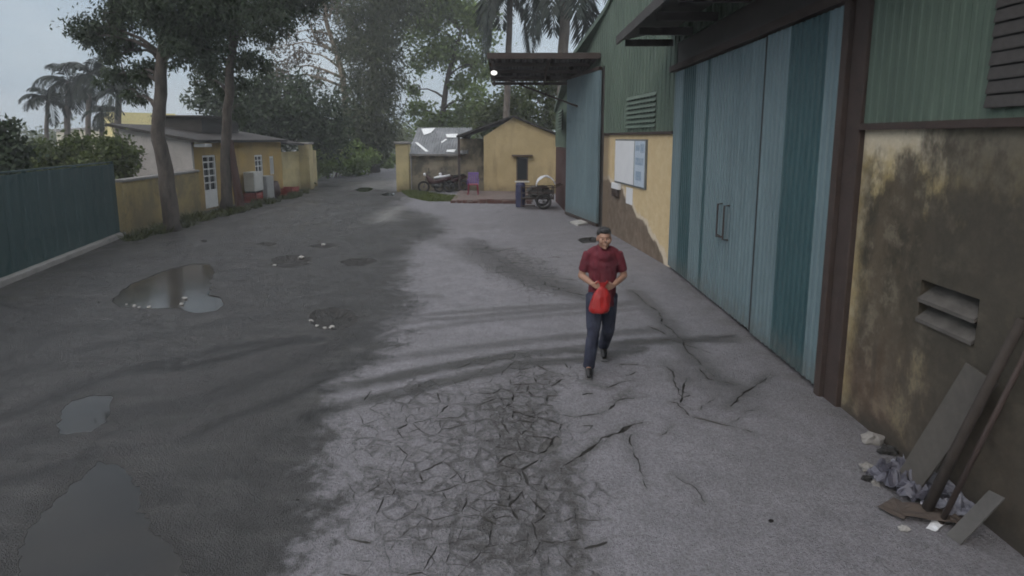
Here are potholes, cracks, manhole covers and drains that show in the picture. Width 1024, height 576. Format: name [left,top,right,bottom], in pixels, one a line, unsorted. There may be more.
crack [336,353,647,576]
pothole [340,258,377,266]
pothole [56,395,113,434]
pothole [270,255,313,268]
pothole [112,263,224,313]
pothole [309,307,359,330]
crack [632,291,765,435]
pothole [17,461,187,576]
